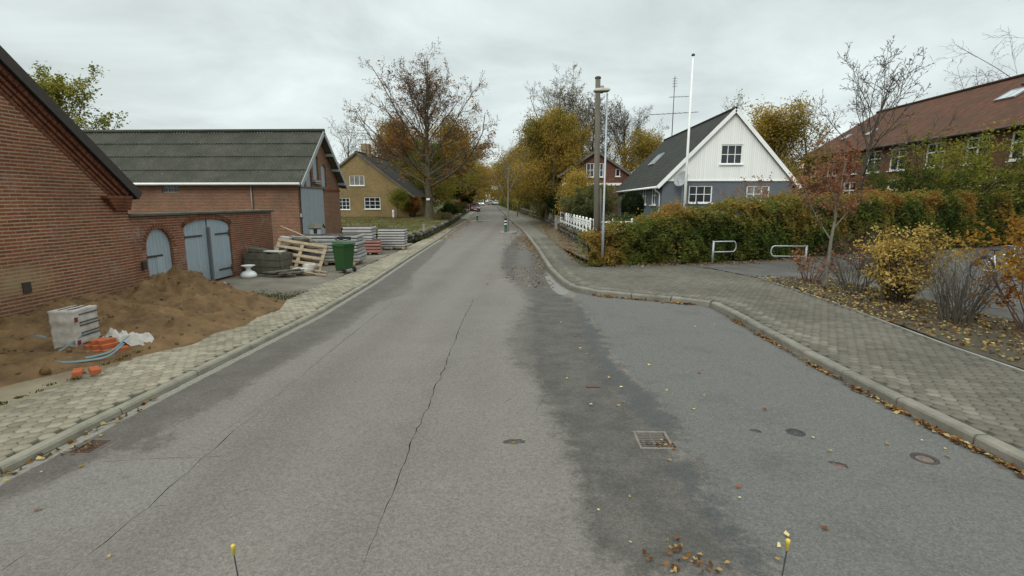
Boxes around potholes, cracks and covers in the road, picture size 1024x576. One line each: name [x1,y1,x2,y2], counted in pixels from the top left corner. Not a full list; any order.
drain grate [65,438,117,455]
manhole cover [786,428,806,437]
manhole cover [910,453,940,465]
crack [66,413,258,575]
drain grate [632,431,674,449]
crack [359,300,473,574]
